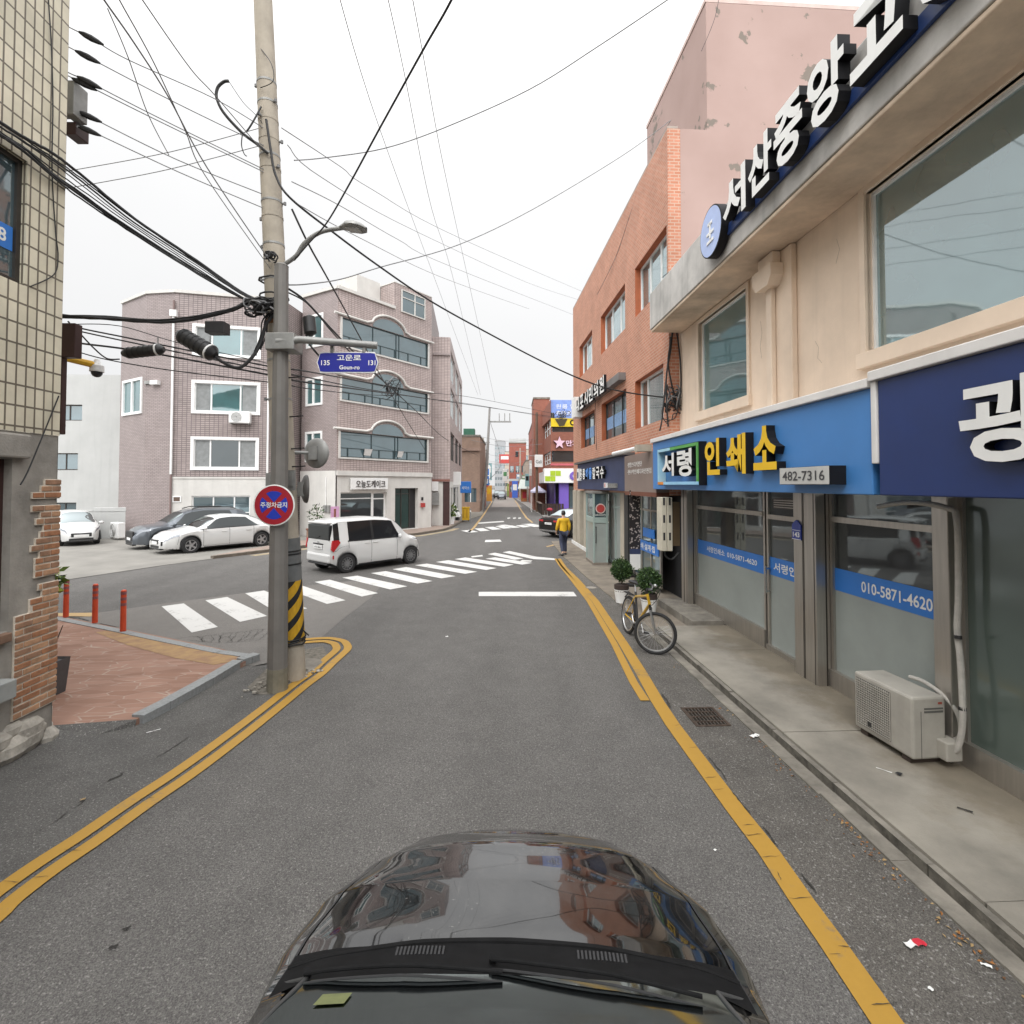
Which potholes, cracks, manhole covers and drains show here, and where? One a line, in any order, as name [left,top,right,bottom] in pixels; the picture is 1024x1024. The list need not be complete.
drain grate [680,707,731,727]
crack [192,629,267,643]
